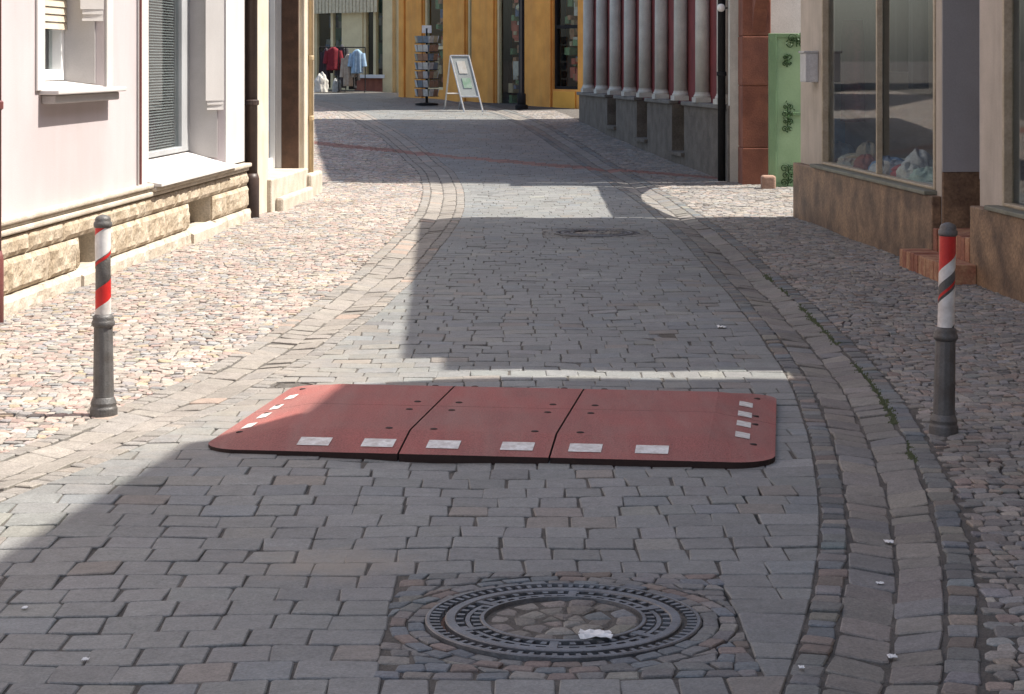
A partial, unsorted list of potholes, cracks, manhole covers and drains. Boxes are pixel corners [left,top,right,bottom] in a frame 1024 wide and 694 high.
manhole cover [425,583,702,663]
manhole cover [554,229,639,238]
